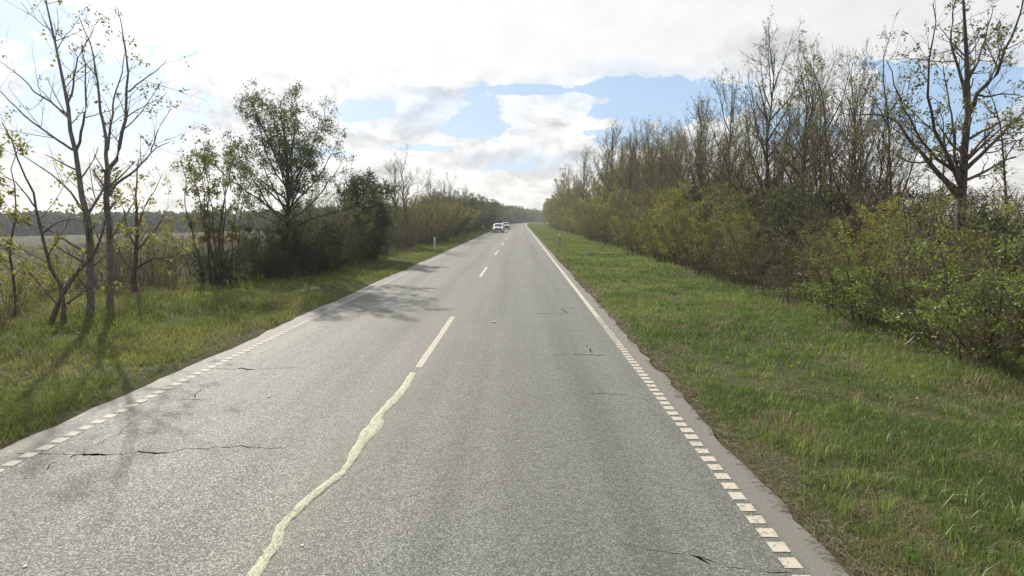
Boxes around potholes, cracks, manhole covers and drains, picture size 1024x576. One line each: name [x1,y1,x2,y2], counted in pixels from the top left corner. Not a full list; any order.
crack [19,425,273,479]
crack [623,544,793,573]
